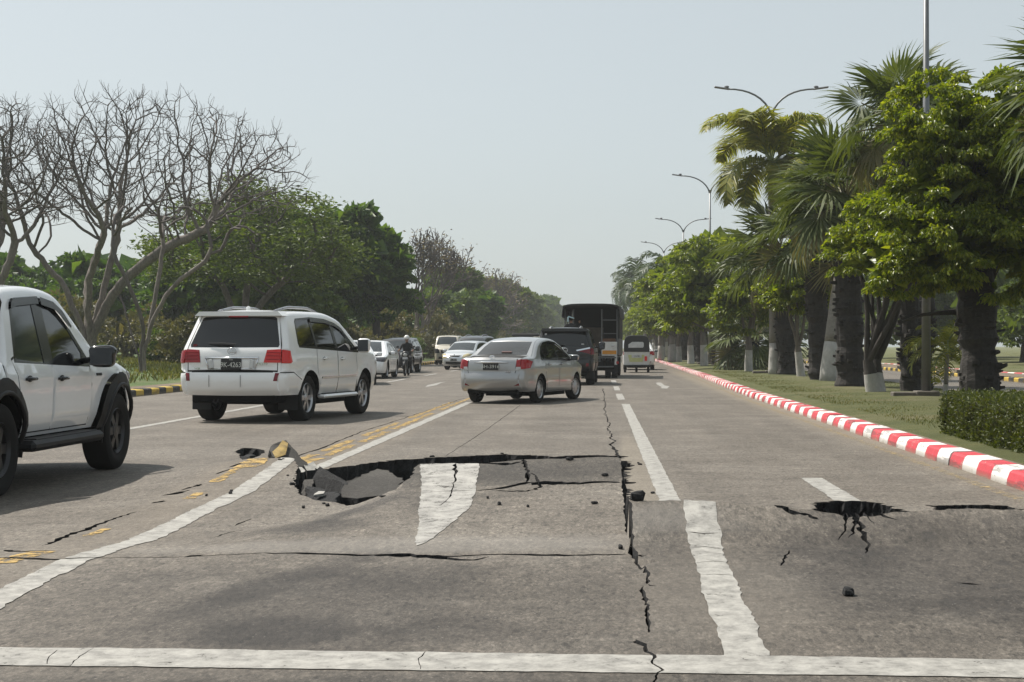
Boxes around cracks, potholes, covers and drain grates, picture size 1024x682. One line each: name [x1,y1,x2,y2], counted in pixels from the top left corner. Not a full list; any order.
crack [0,389,664,682]
pothole [235,448,265,457]
pothole [293,454,636,533]
